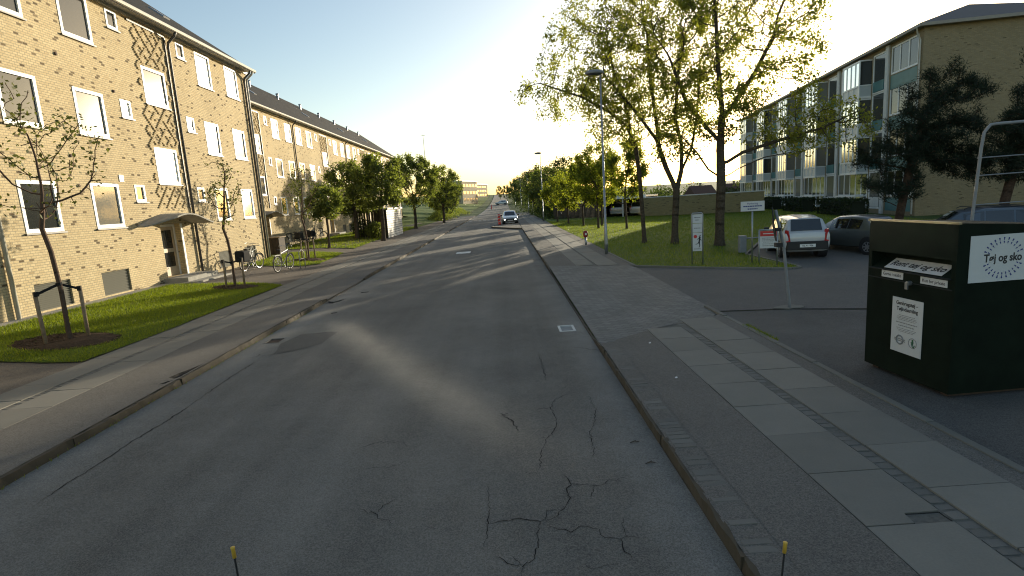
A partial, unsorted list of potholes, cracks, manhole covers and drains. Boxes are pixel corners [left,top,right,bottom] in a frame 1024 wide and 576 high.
crack [525,393,571,474]
crack [485,477,639,576]
